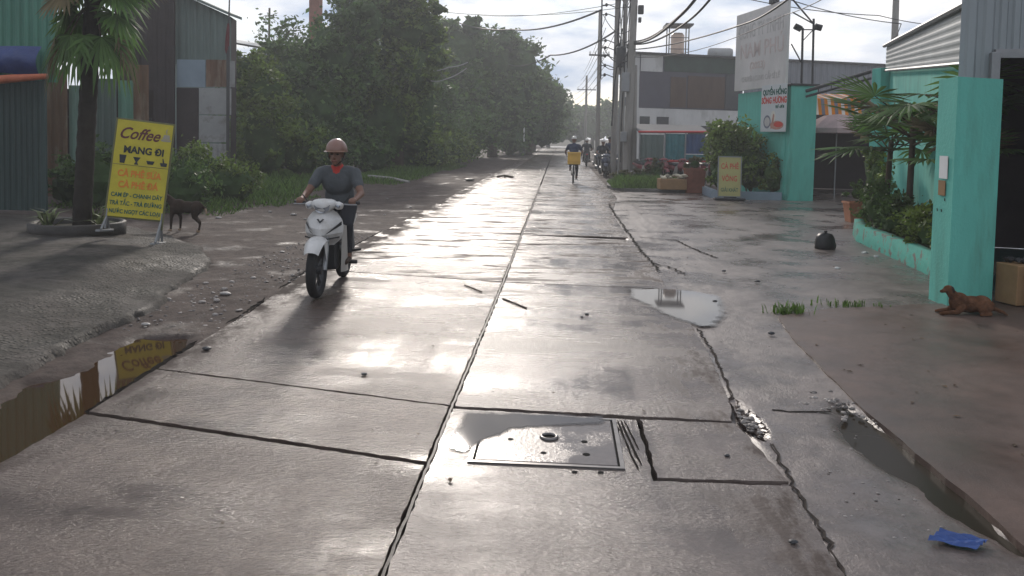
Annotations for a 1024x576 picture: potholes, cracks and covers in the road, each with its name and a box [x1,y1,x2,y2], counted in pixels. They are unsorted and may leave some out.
manhole cover [467,417,625,474]
crack [696,328,846,576]
pothole [728,397,771,441]
crack [601,202,718,274]
